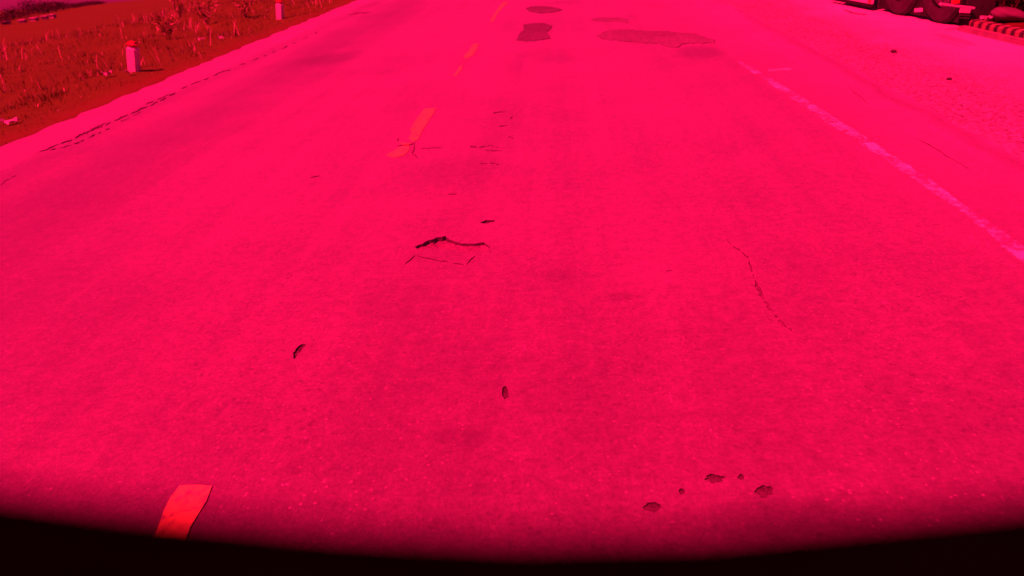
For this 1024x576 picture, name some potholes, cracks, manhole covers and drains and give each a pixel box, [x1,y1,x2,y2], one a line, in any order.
pothole [704,473,725,484]
crack [470,111,514,165]
crack [727,240,792,332]
crack [397,129,439,159]
pothole [643,502,661,513]
crack [406,255,476,266]
